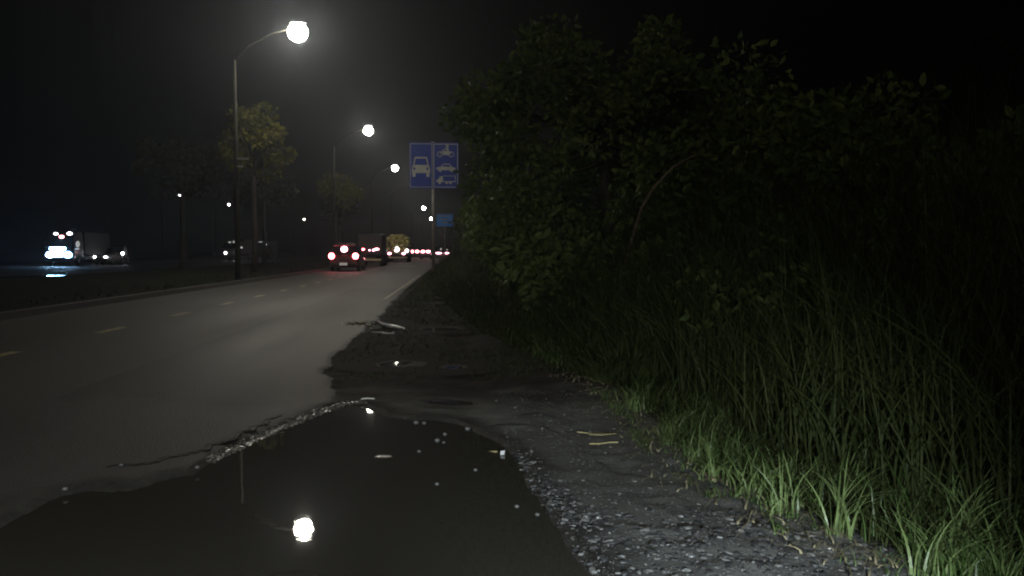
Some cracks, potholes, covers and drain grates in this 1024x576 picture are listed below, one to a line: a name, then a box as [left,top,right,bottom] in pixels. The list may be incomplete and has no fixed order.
pothole [420,396,480,406]
crack [106,414,282,468]
pothole [0,400,616,576]
